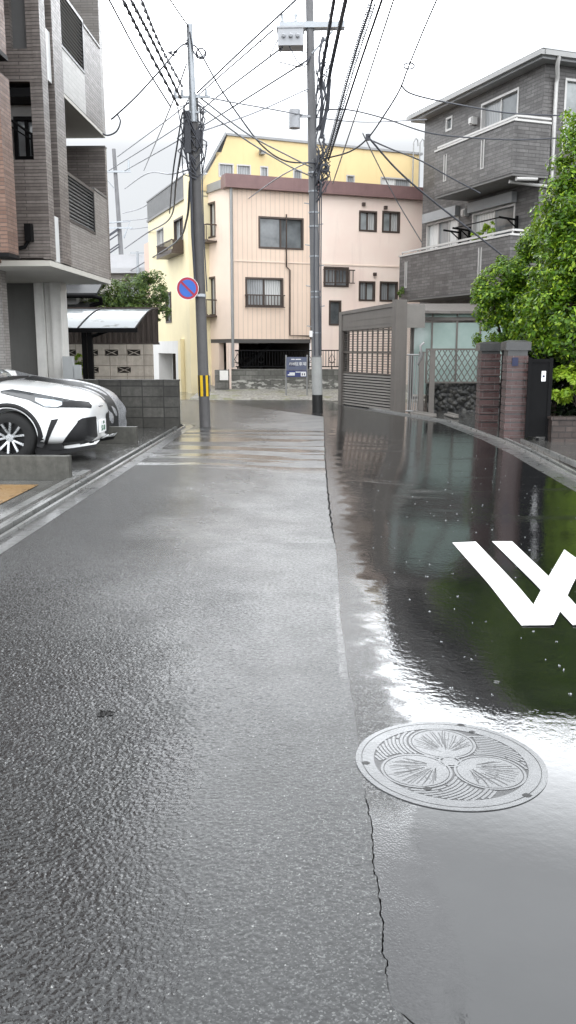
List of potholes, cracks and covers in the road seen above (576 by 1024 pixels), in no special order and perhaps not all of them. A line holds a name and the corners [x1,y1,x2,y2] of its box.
crack [365,794,389,990]
manhole cover [356,722,548,812]
